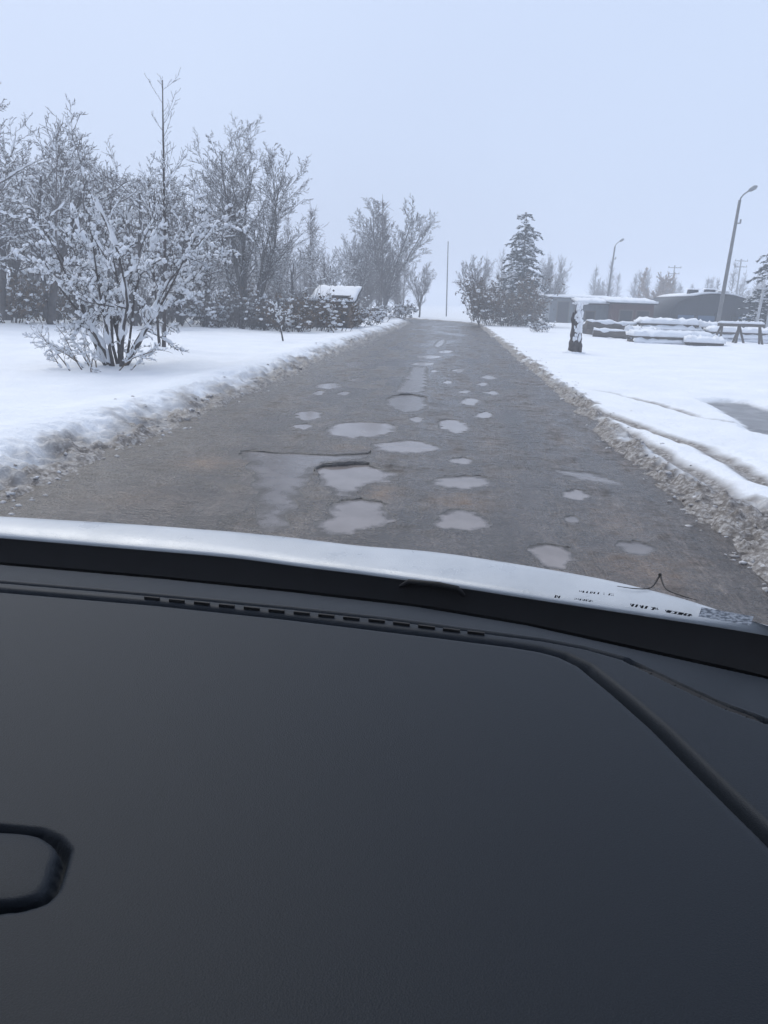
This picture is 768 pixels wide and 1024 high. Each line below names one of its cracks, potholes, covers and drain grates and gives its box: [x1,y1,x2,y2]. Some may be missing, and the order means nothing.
pothole [315,461,399,496]
pothole [431,508,493,531]
pothole [554,469,624,487]
pothole [560,488,592,500]
pothole [310,497,397,537]
pothole [325,421,399,438]
pothole [238,450,371,533]
pothole [614,539,659,556]
pothole [459,397,483,406]
pothole [436,419,473,434]
pothole [525,542,581,570]
pothole [384,393,429,413]
